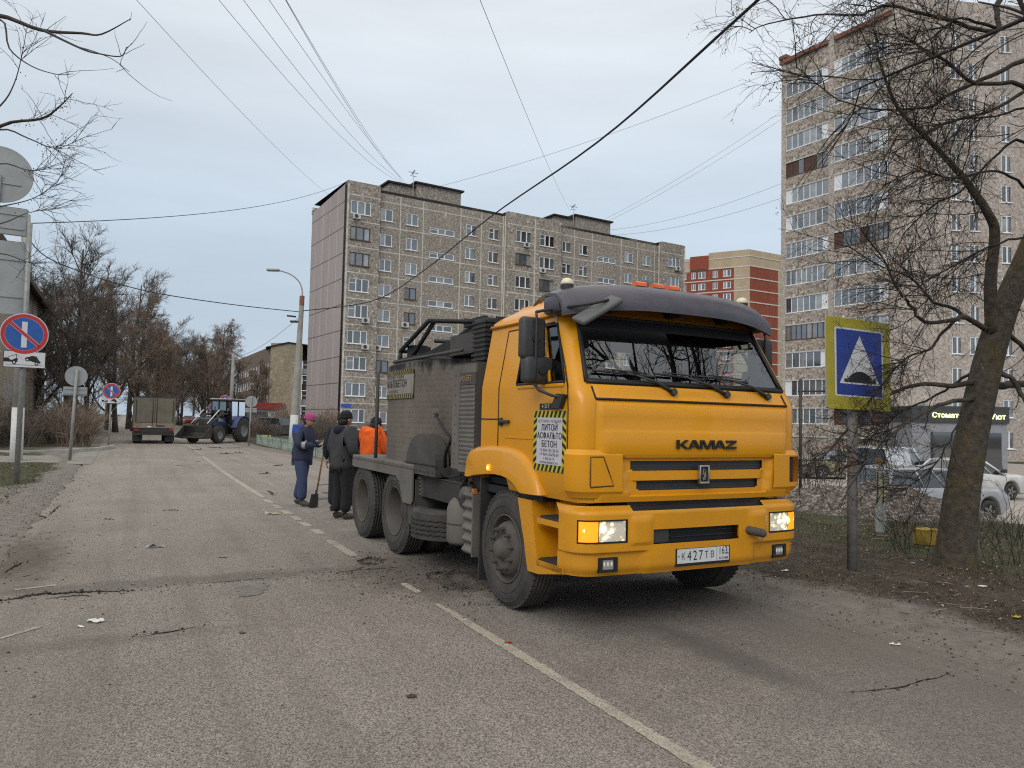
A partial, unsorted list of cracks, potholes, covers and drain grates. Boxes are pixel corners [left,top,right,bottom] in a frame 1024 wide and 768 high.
crack [128,624,206,640]
crack [847,672,955,693]
crack [0,560,143,601]
